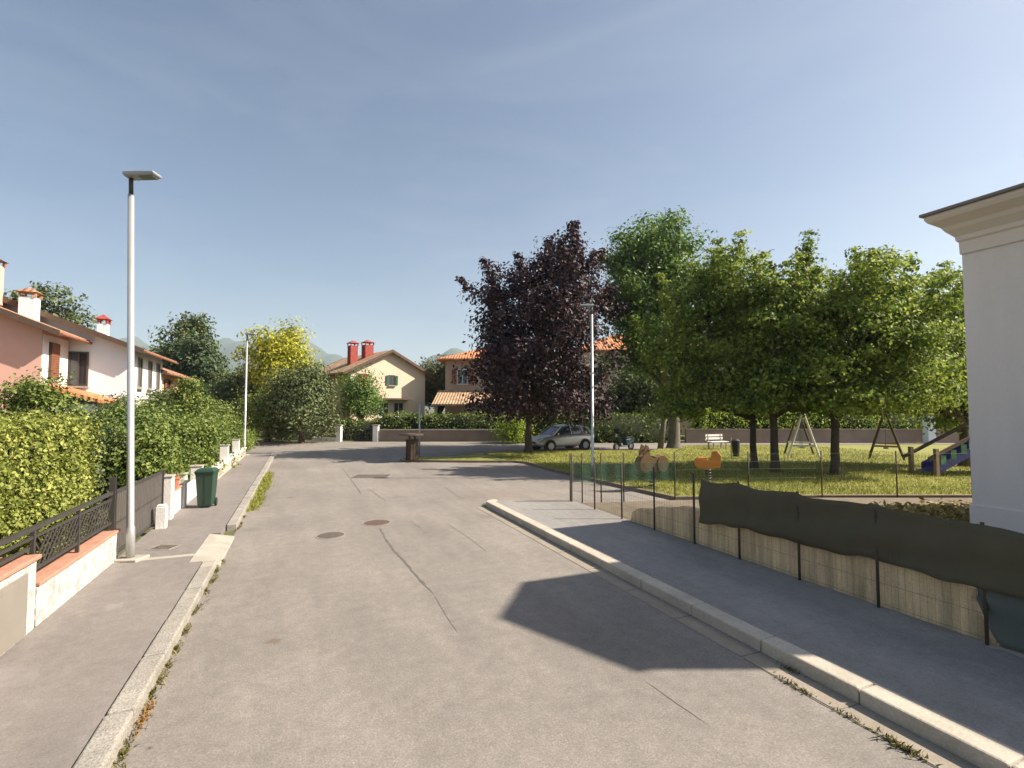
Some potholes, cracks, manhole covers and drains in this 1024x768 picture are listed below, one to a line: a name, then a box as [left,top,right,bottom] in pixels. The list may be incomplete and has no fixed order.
crack [647,682,706,723]
crack [379,522,457,631]
